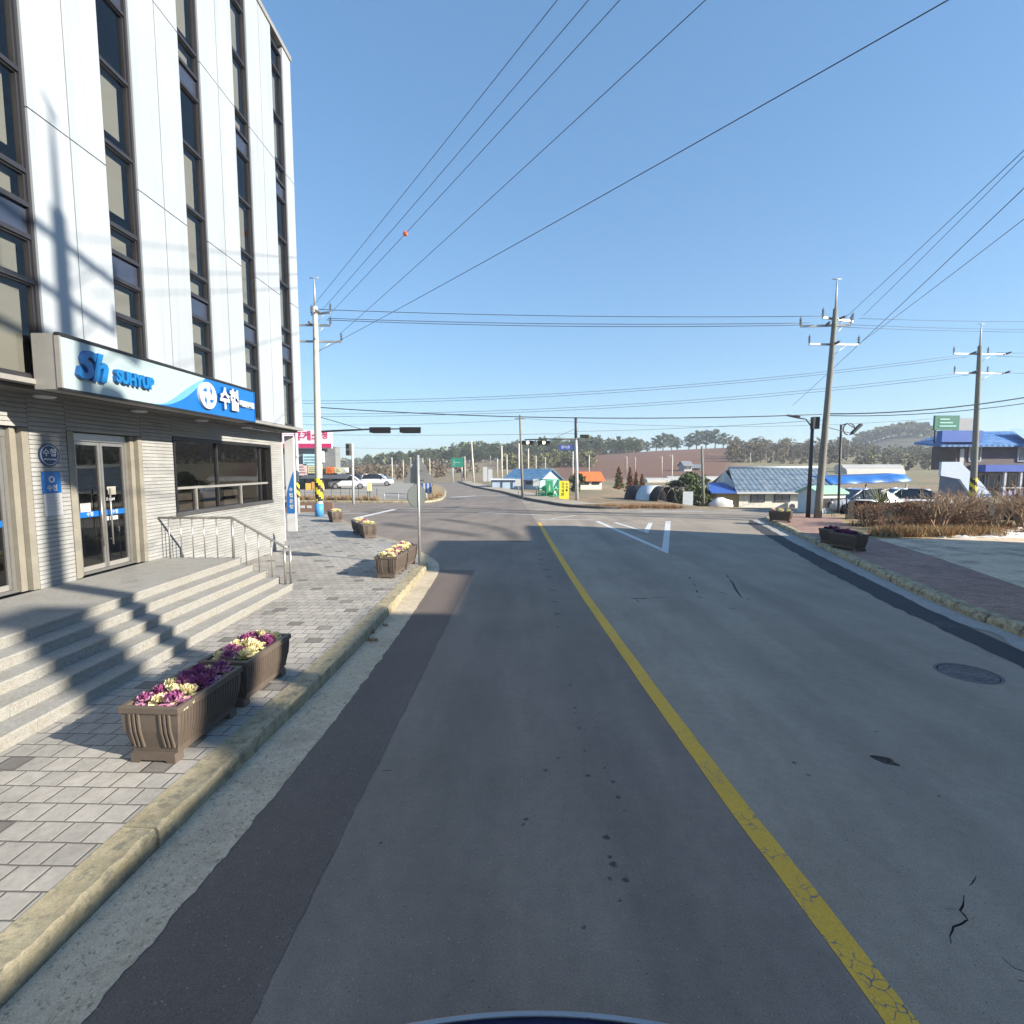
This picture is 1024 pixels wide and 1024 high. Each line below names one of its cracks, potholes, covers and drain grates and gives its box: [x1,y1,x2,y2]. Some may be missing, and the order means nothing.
crack [946,877,976,943]
pothole [870,755,901,767]
manhole cover [933,663,1006,685]
